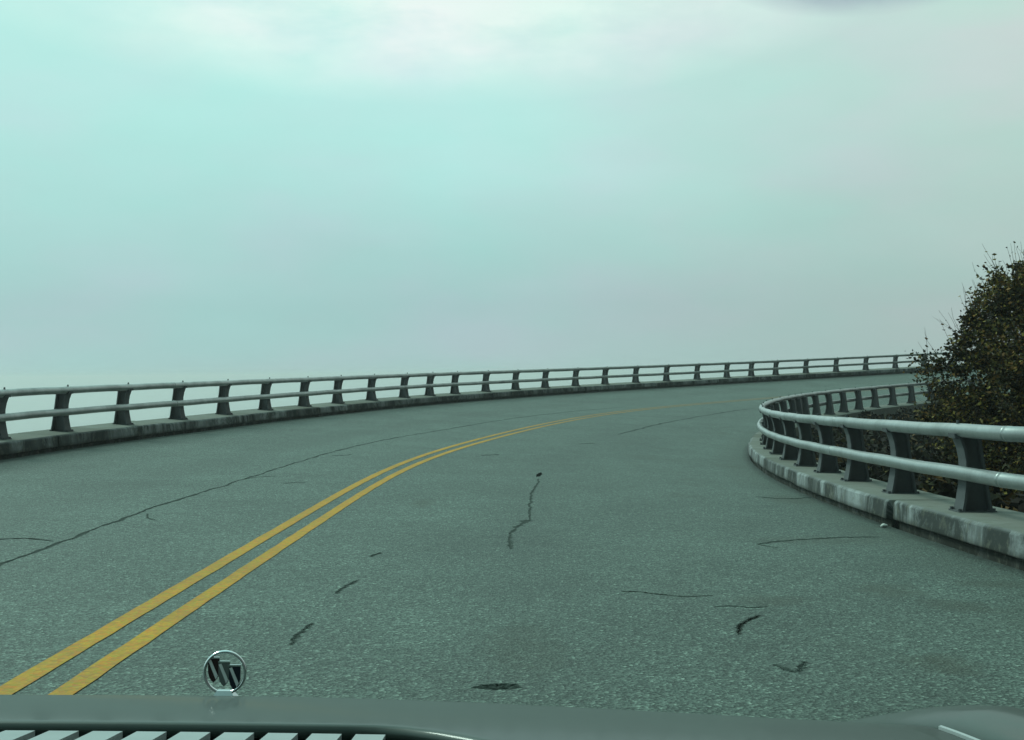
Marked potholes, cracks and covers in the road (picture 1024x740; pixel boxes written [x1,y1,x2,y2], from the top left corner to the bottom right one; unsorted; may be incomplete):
crack [624,591,767,635]
crack [0,408,607,566]
crack [621,409,746,434]
crack [288,622,314,645]
crack [758,536,866,548]
crack [775,661,808,672]
